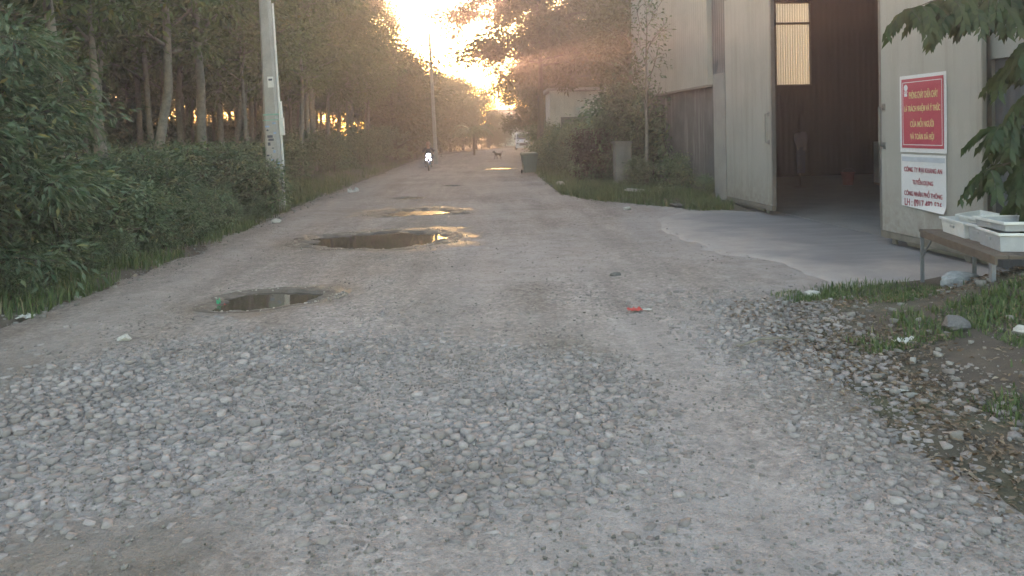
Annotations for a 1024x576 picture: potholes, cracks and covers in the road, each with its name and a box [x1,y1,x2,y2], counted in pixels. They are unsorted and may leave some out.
pothole [361,207,468,218]
pothole [285,228,468,251]
pothole [192,285,348,313]
